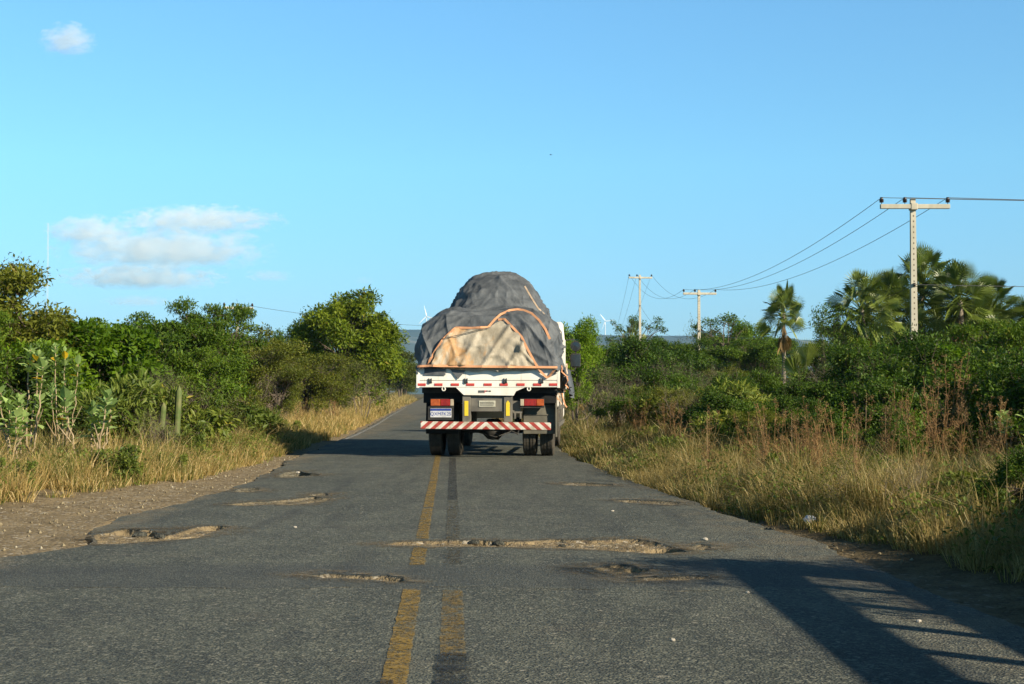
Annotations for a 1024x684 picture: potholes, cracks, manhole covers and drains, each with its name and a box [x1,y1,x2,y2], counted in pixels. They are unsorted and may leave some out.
pothole [386,538,687,553]
pothole [222,496,331,506]
pothole [311,573,406,582]
pothole [594,564,649,574]
pothole [92,526,230,544]
